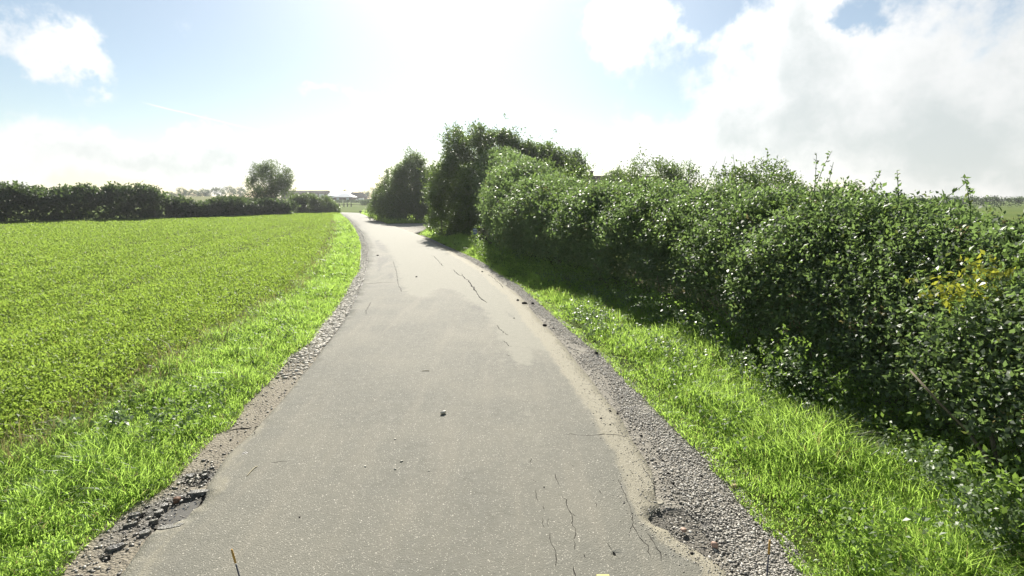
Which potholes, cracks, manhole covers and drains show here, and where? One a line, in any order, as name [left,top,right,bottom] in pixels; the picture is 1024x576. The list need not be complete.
pothole [648,510,717,560]
pothole [183,474,208,487]
pothole [150,488,207,532]
crack [535,465,585,576]
crack [618,480,662,563]
